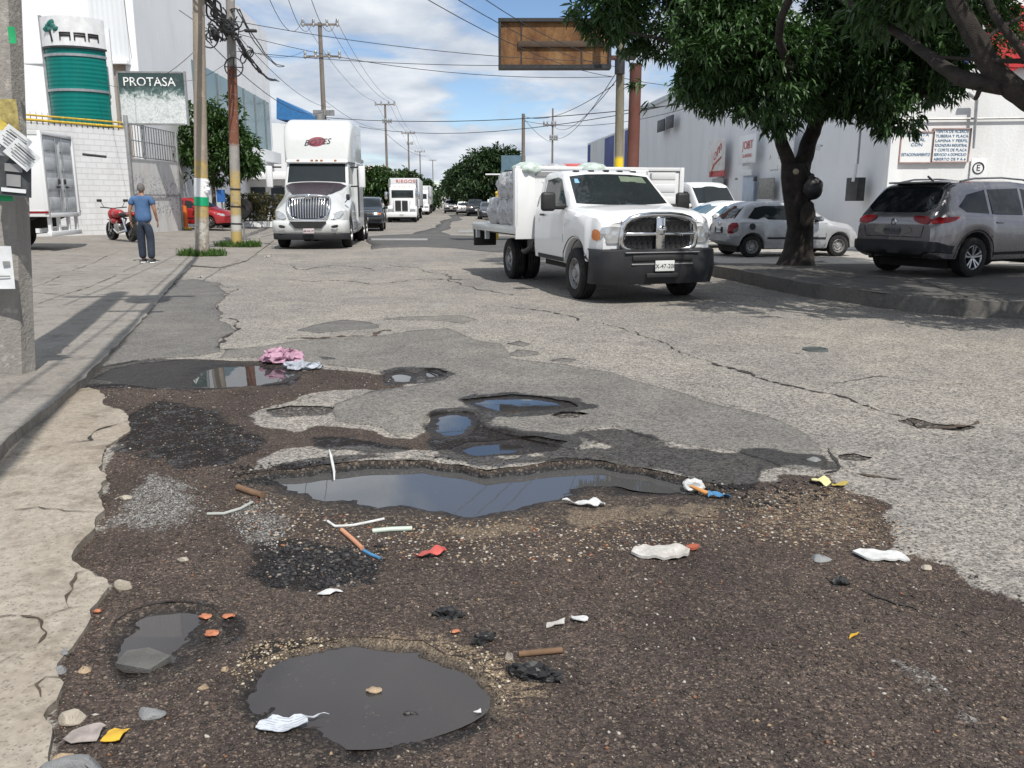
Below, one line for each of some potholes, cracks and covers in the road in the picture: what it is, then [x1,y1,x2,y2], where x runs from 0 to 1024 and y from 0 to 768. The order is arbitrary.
crack [0,570,86,662]
pothole [231,636,506,767]
crack [711,362,981,428]
pothole [464,396,577,413]
pothole [448,438,565,457]
pothole [416,370,446,379]
pothole [231,460,747,539]
pothole [105,602,226,687]
pothole [427,412,479,441]
pothole [93,359,307,388]
pothole [384,371,420,385]
crack [277,263,701,359]
